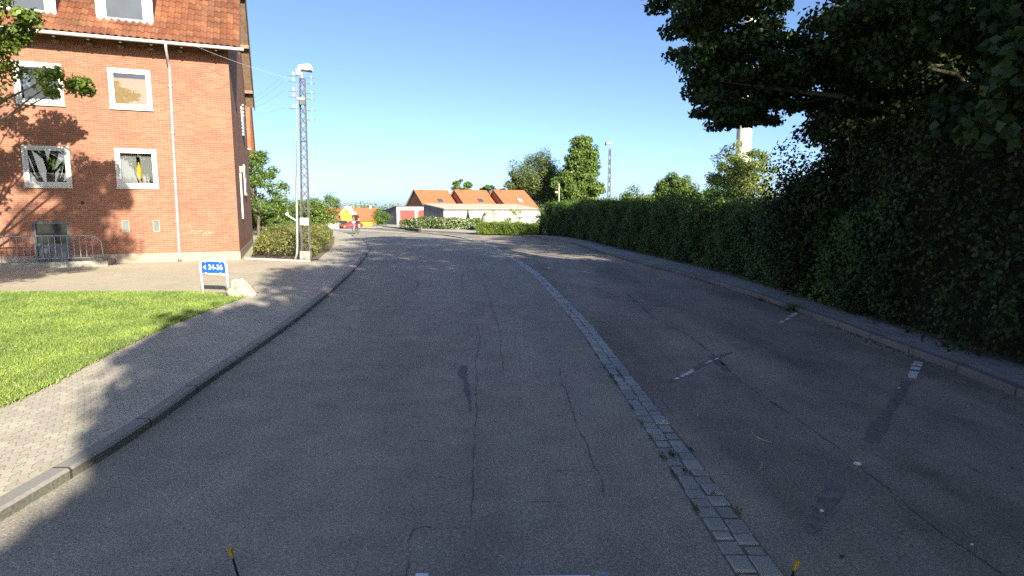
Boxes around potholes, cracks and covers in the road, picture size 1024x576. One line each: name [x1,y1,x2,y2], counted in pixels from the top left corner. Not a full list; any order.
crack [405,264,504,576]
crack [559,366,604,495]
